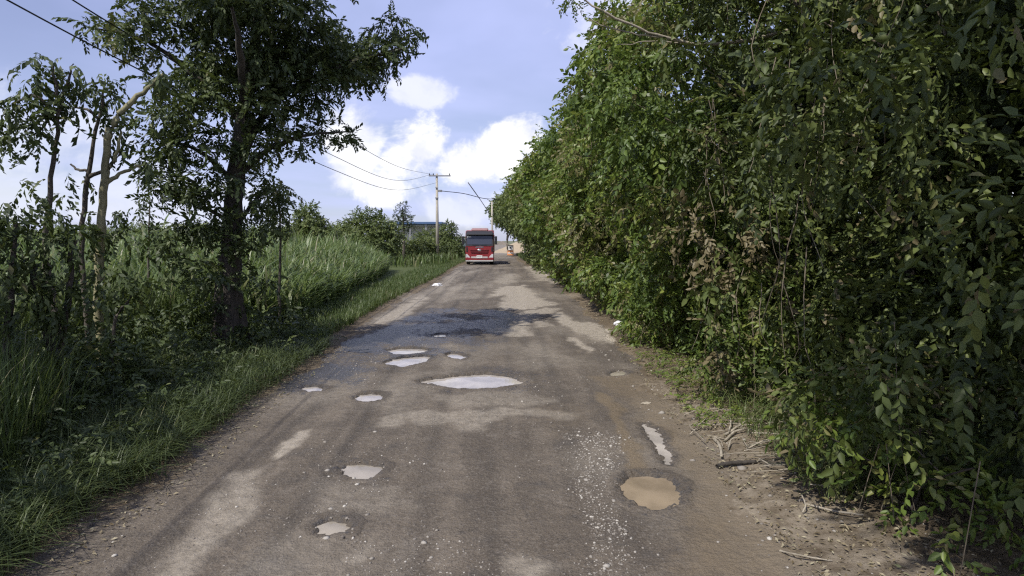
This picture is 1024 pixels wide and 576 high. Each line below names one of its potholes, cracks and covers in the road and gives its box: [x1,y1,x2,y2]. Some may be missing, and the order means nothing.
pothole [374,353,440,369]
pothole [289,383,335,393]
pothole [632,422,686,468]
pothole [344,390,393,404]
pothole [406,370,536,391]
pothole [295,511,368,542]
pothole [602,368,636,377]
pothole [379,346,439,357]
pothole [439,351,474,361]
pothole [605,467,697,518]
pothole [324,456,396,483]
